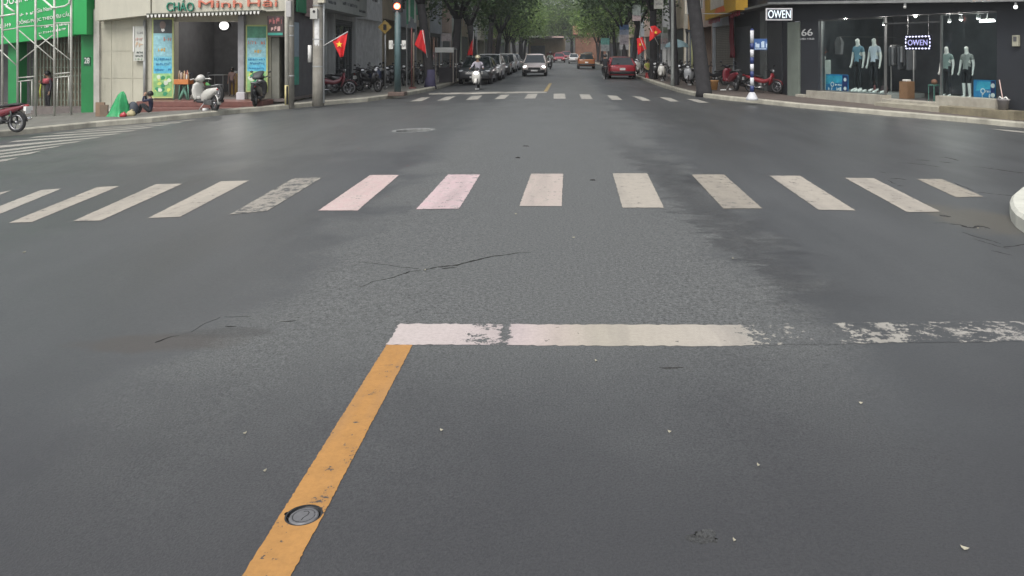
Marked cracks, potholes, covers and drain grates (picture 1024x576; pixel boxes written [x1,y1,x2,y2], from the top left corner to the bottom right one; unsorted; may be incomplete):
manhole cover [285,505,323,526]
crack [954,224,1024,255]
crack [356,252,529,288]
crack [883,157,1022,184]
pothole [685,529,718,544]
